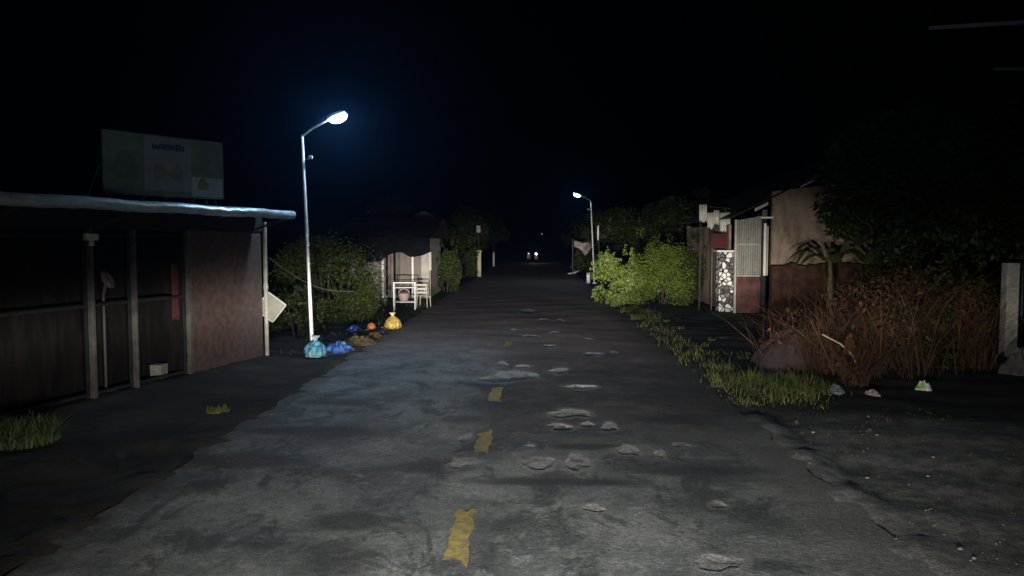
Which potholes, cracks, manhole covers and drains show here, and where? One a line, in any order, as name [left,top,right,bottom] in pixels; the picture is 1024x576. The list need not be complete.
pothole [479,371,540,383]
pothole [548,423,574,431]
pothole [448,458,475,469]
pothole [601,422,618,431]
pothole [582,503,606,512]
pothole [565,453,591,471]
pothole [694,554,745,572]
pothole [616,444,640,456]
pothole [521,457,556,470]
pothole [548,409,591,418]
